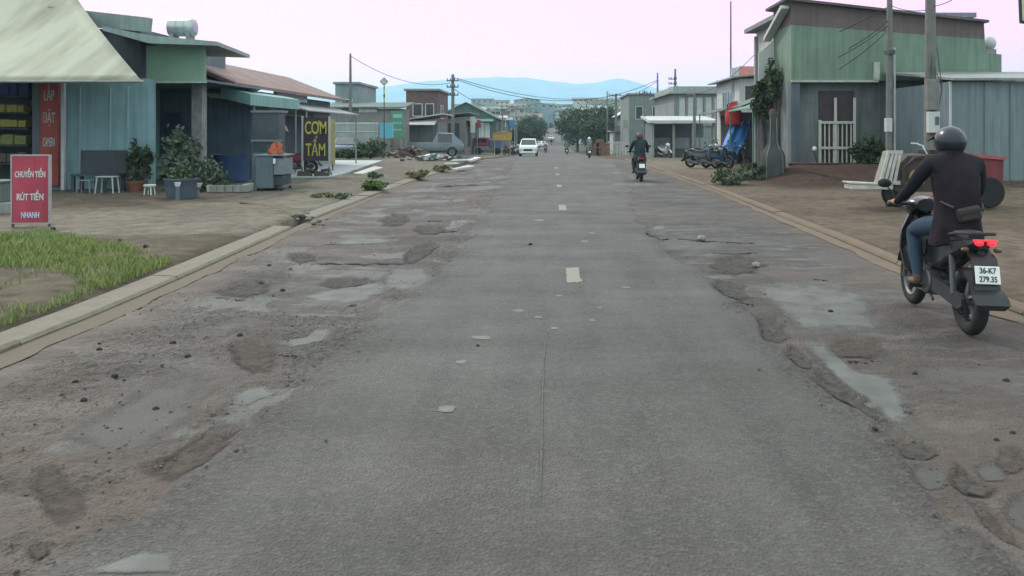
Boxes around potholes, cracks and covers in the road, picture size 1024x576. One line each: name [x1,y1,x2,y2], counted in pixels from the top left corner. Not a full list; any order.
pothole [233,339,273,372]
pothole [952,469,995,495]
pothole [37,467,81,521]
pothole [216,279,267,296]
pothole [404,244,439,263]
pothole [382,215,408,226]
pothole [831,338,882,357]
pothole [914,466,945,489]
pothole [977,465,1005,480]
crack [646,233,757,254]
